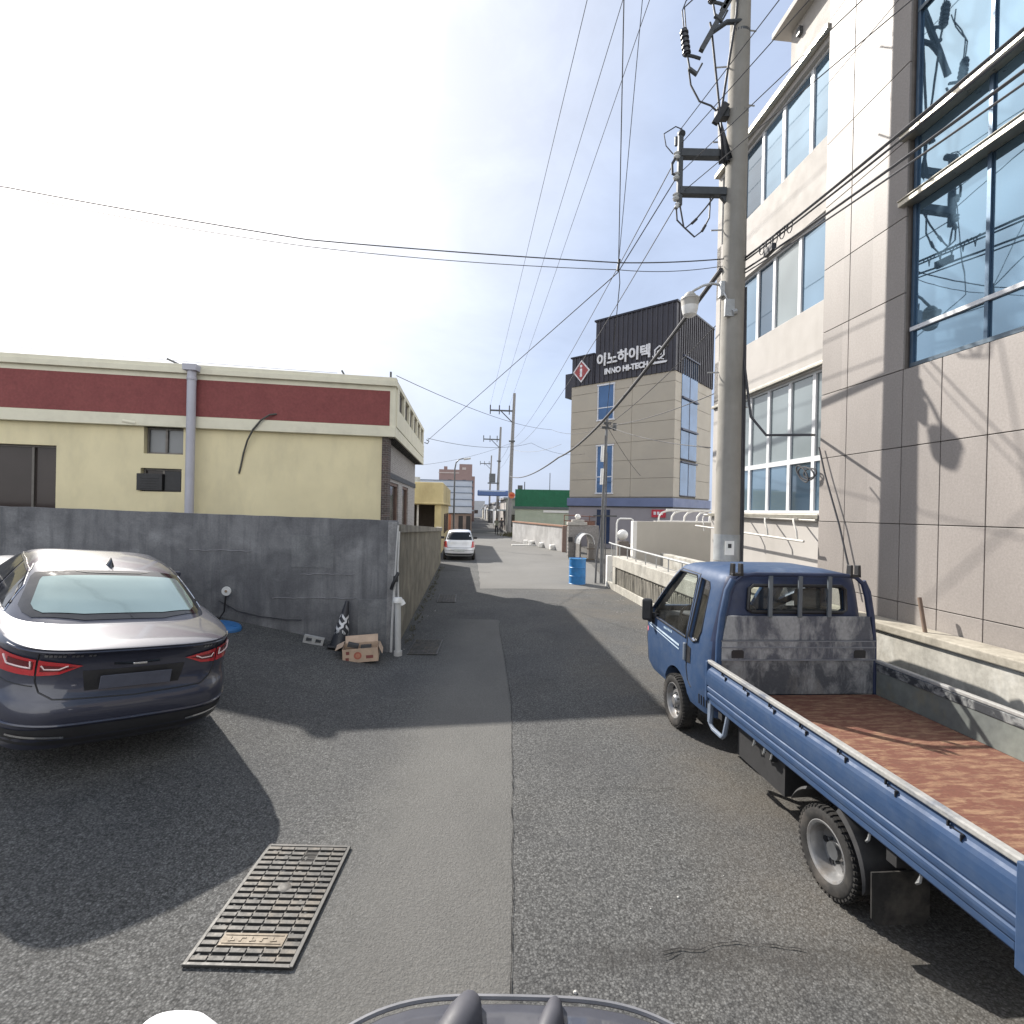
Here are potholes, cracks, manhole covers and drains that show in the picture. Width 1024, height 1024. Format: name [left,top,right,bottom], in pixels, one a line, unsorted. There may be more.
crack [661,941,805,958]
drain grate [181,843,351,970]
drain grate [407,639,443,655]
drain grate [437,594,457,602]
